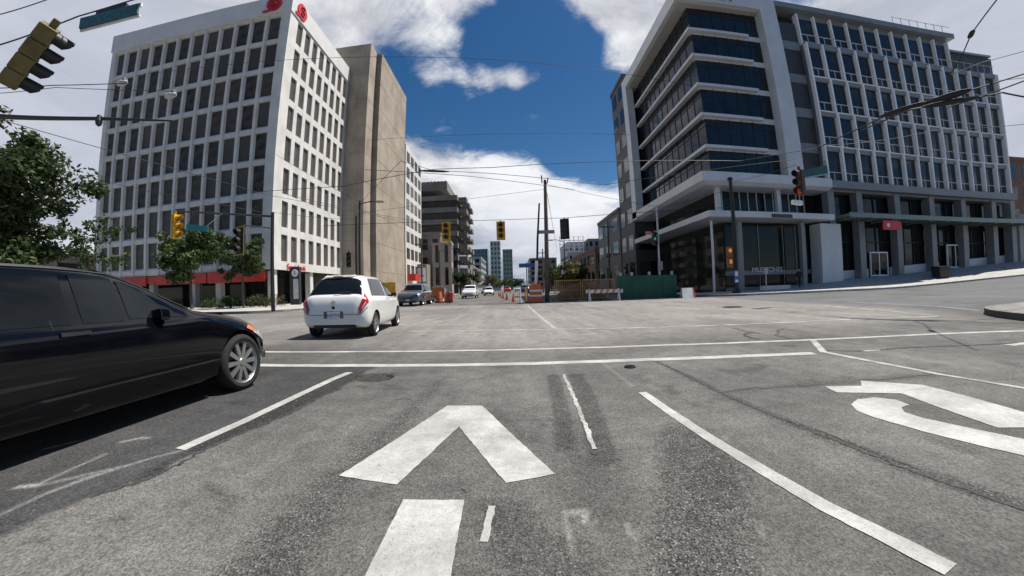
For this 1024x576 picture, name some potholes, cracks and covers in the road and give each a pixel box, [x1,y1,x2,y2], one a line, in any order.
crack [734,328,806,340]
crack [655,361,1024,510]
